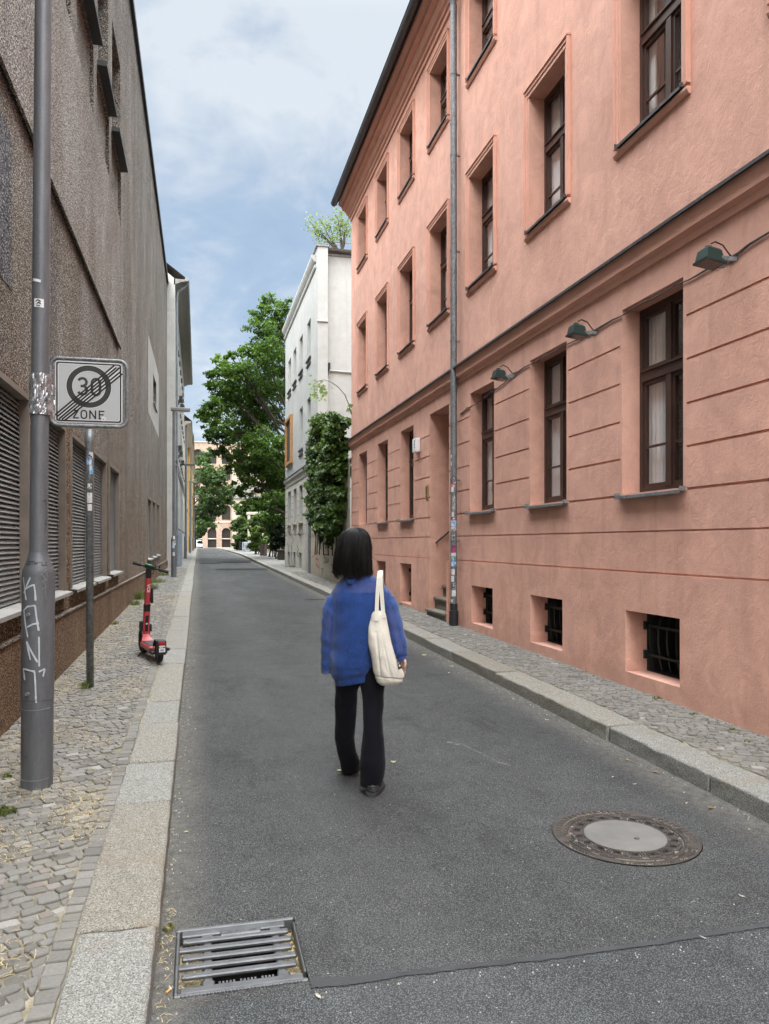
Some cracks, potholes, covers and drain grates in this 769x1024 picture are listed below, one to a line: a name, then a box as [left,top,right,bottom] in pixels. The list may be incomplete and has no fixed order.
manhole cover [552,809,702,866]
drain grate [173,917,309,999]
